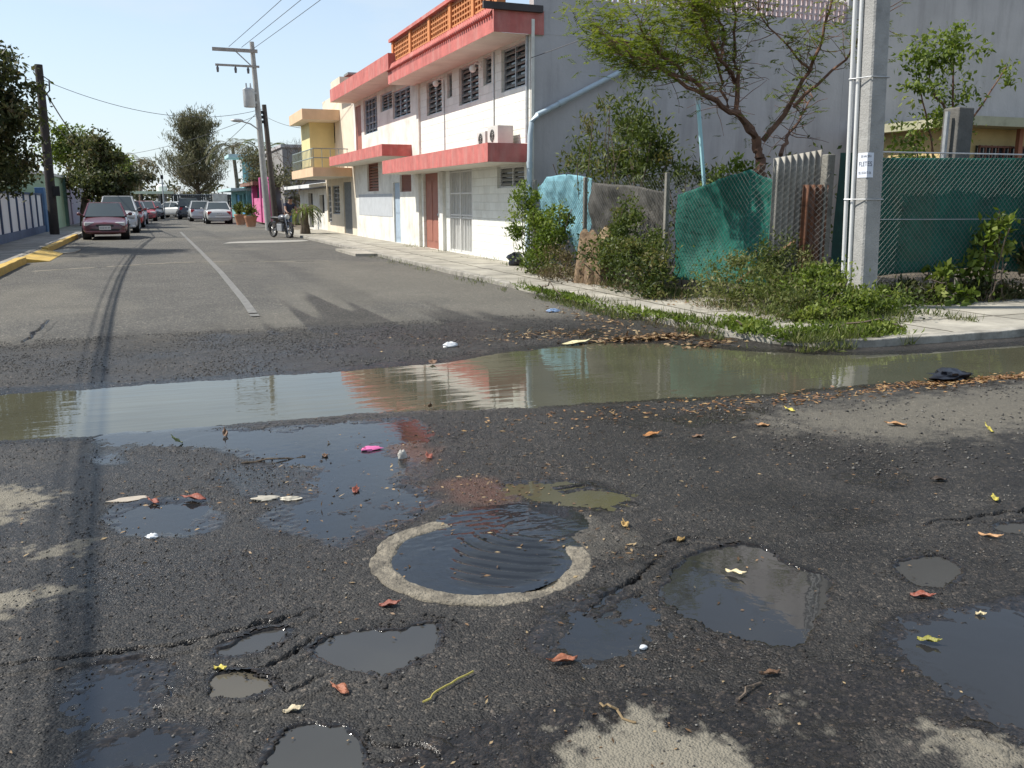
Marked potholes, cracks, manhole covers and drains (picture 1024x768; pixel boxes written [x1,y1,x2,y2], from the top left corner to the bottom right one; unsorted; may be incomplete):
crack [0,604,340,716]
pothole [187,661,293,713]
pothole [298,612,462,691]
pothole [233,708,396,768]
crack [913,504,1024,529]
crack [573,532,743,619]
crack [10,320,59,347]
pothole [640,536,853,661]
pothole [189,622,312,668]
manhole cover [369,503,592,607]
pothole [871,548,983,597]
